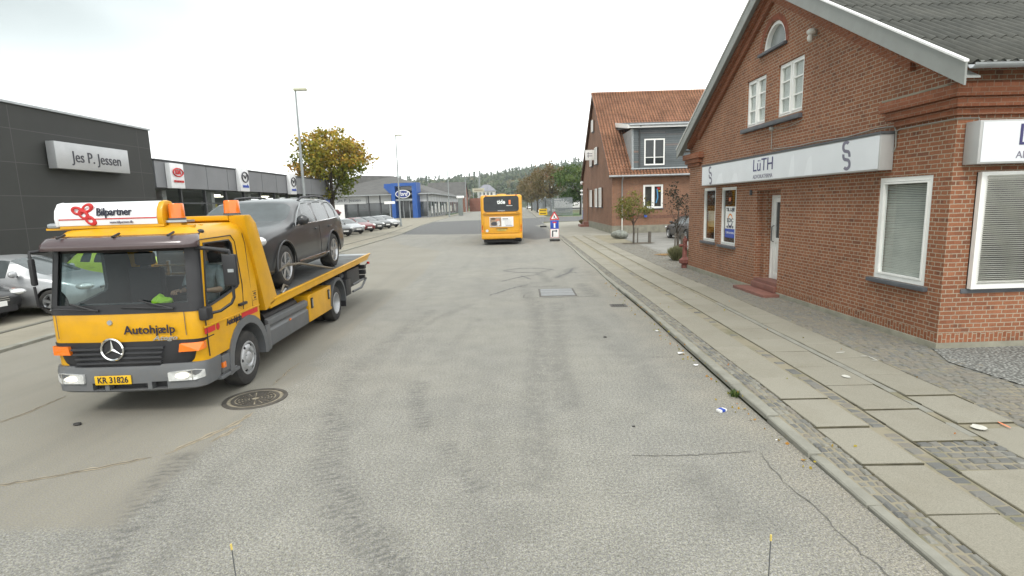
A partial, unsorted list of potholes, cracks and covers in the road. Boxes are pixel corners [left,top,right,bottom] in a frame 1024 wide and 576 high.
manhole cover [222,388,288,410]
manhole cover [538,288,577,297]
crack [625,451,890,576]
